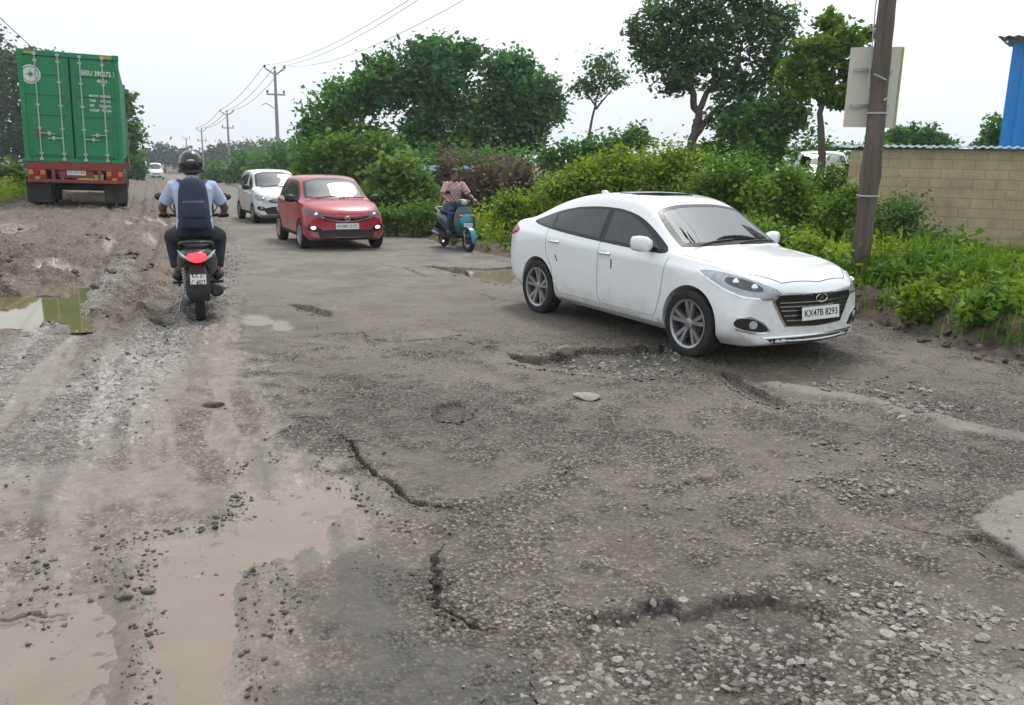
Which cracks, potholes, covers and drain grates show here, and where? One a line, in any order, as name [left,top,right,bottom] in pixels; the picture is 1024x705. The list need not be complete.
pothole [506,344,690,382]
pothole [427,401,478,425]
pothole [0,283,85,330]
pothole [715,370,795,409]
crack [328,434,471,513]
pothole [417,265,521,288]
crack [420,544,503,635]
pothole [287,304,334,318]
